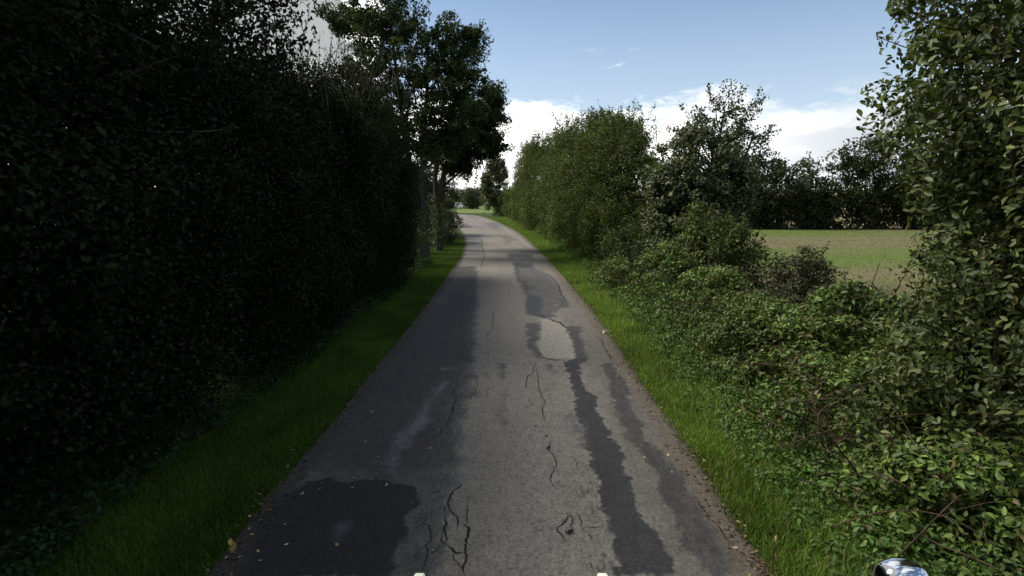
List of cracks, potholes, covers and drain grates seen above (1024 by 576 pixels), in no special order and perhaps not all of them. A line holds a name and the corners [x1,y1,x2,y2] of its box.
crack [415,481,470,576]
crack [525,364,546,418]
crack [435,345,488,440]
crack [548,442,607,568]
